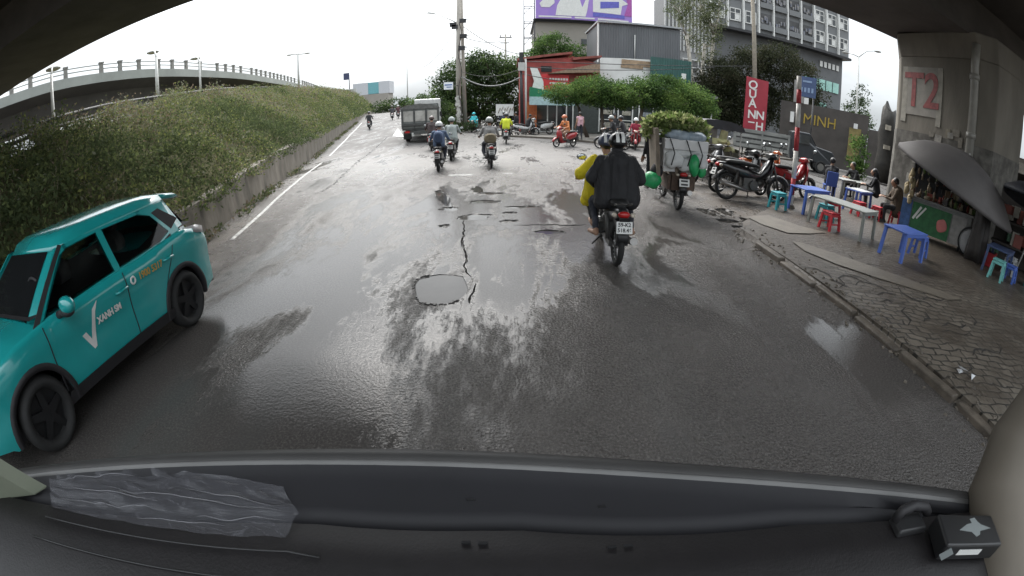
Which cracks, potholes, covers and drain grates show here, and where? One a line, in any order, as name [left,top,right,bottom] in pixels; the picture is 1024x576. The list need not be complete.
crack [461,221,476,304]
pothole [412,274,468,306]
pothole [435,190,452,208]
